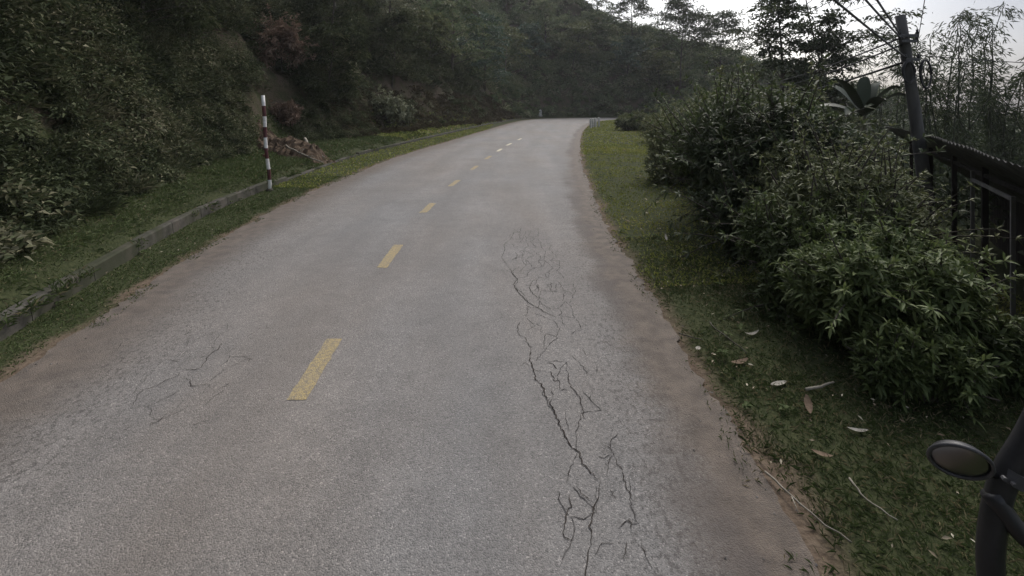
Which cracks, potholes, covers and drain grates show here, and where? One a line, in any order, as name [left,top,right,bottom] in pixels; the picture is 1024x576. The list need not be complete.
crack [118,326,269,430]
crack [501,229,652,576]
